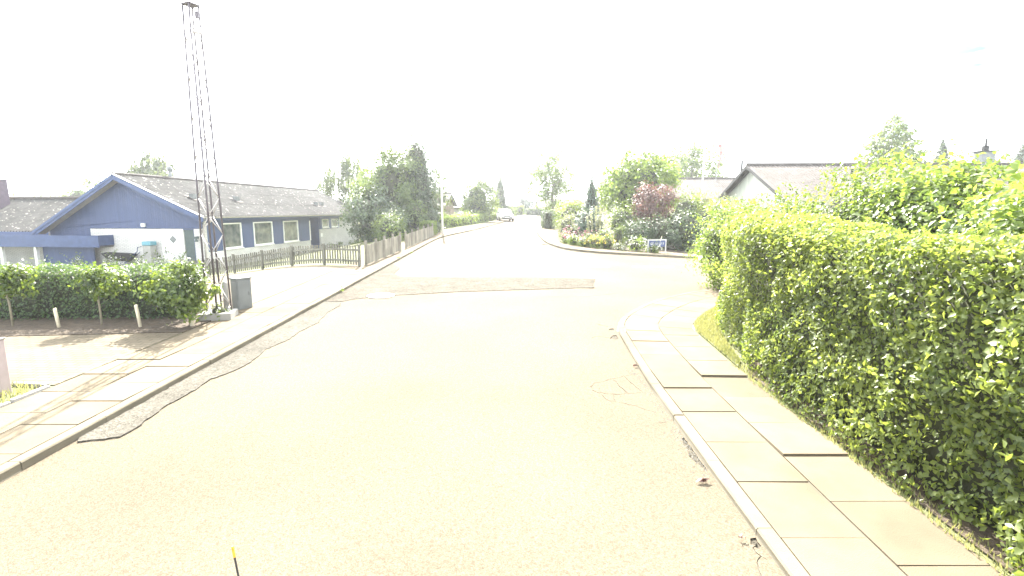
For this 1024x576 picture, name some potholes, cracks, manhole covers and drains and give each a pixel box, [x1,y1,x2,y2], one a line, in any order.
crack [590,374,649,411]
